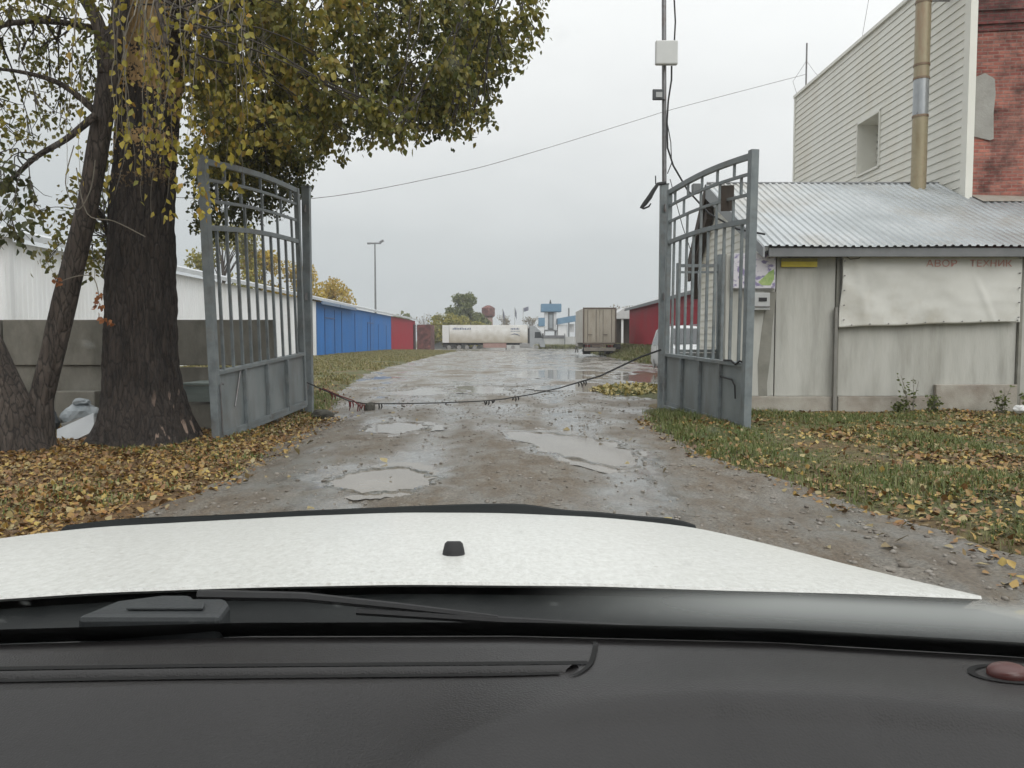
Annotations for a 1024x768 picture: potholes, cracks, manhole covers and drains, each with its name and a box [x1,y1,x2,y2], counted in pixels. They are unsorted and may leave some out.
pothole [584,371,658,383]
pothole [500,427,663,474]
pothole [323,462,445,500]
pothole [501,369,638,380]
pothole [359,421,447,437]
